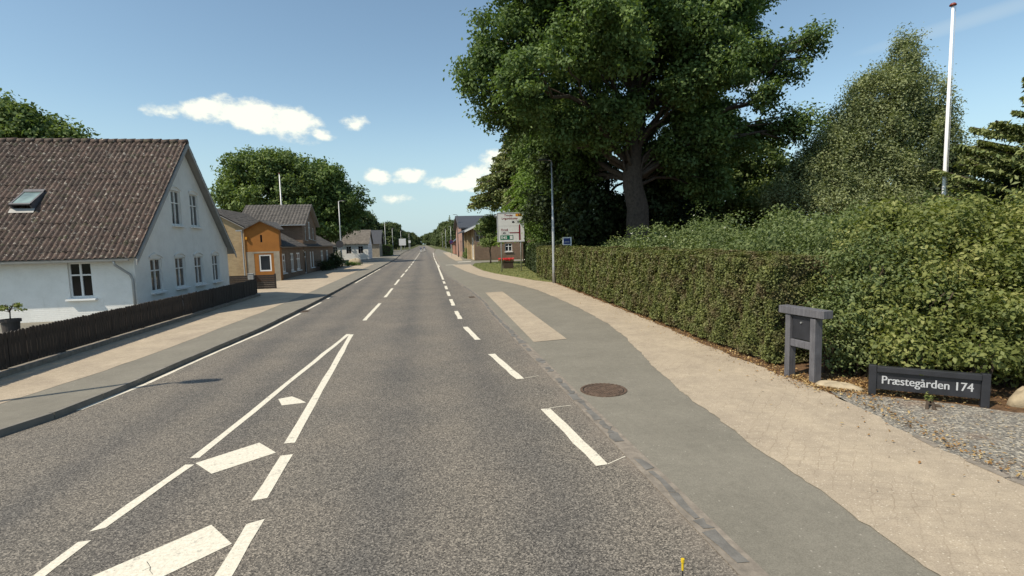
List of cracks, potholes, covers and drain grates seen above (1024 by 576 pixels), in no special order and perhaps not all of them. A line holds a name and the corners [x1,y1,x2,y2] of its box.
manhole cover [580,383,627,397]
